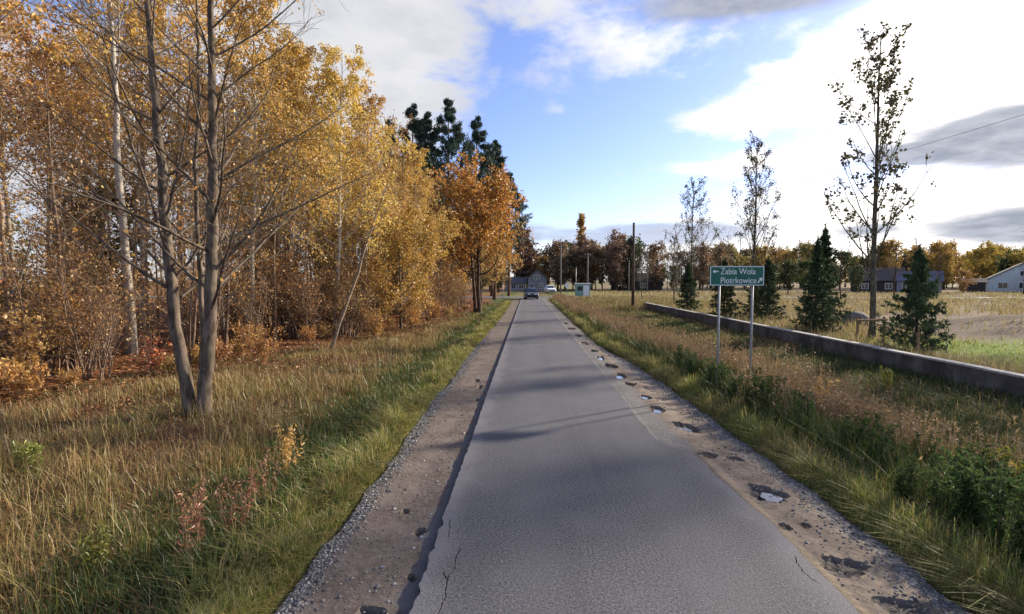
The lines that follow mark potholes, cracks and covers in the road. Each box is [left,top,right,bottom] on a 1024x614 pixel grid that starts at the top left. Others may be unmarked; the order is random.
pothole [816,555,872,579]
pothole [868,596,932,614]
pothole [744,483,790,504]
pothole [671,421,701,433]
pothole [354,605,387,614]
crack [437,519,460,614]
